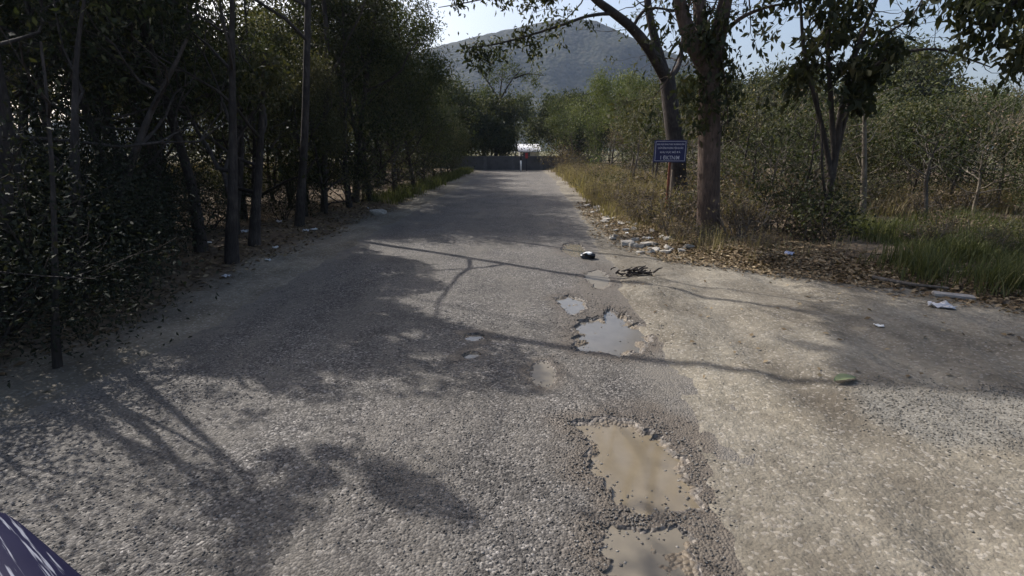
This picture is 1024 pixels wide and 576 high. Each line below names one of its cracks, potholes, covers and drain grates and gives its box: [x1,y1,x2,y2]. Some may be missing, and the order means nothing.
pothole [554,294,588,315]
pothole [461,332,486,341]
pothole [568,306,654,358]
pothole [570,413,706,517]
pothole [597,522,703,576]
pothole [527,359,557,388]
pothole [461,351,481,359]
pothole [582,270,612,290]
